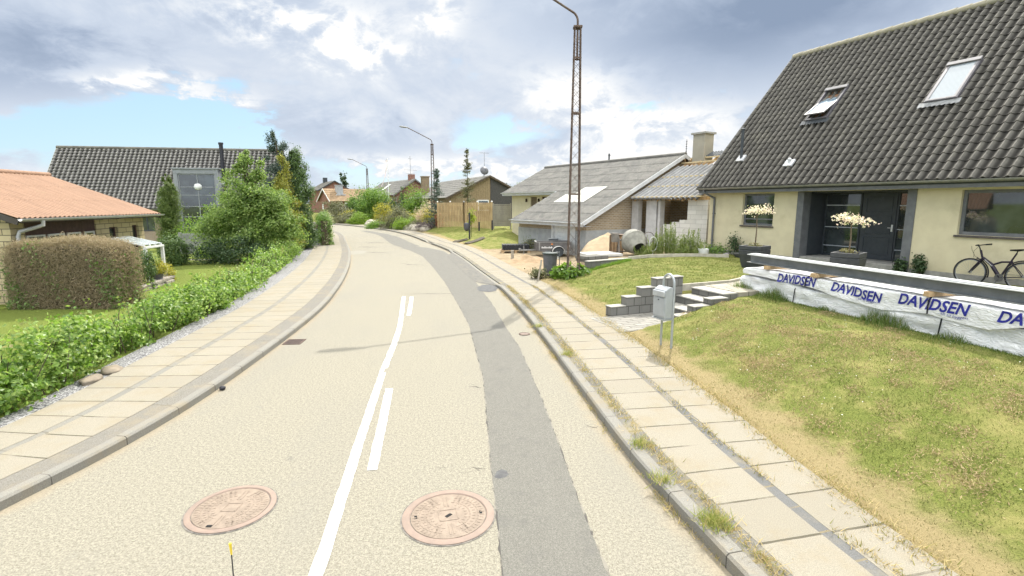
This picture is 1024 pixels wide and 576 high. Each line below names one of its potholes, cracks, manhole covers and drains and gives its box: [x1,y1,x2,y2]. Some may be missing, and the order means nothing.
manhole cover [400,490,496,547]
manhole cover [181,485,278,535]
